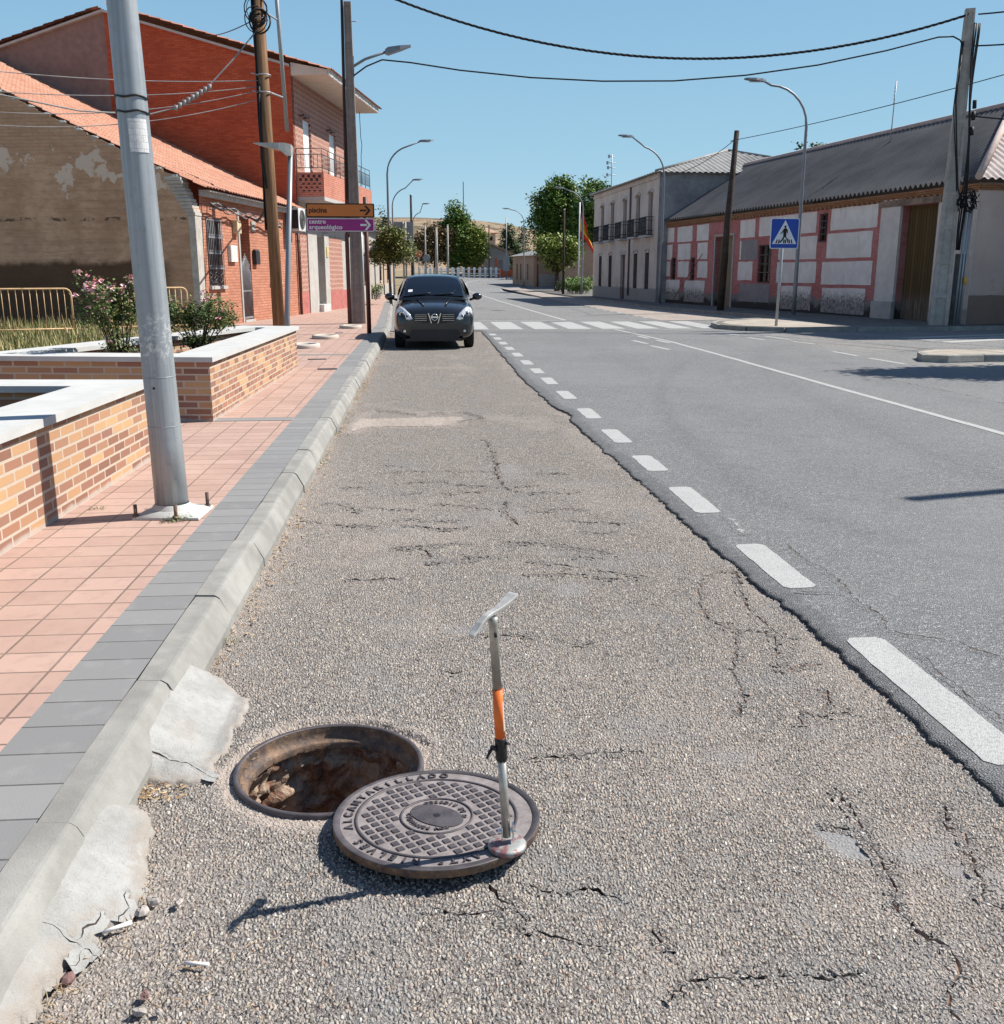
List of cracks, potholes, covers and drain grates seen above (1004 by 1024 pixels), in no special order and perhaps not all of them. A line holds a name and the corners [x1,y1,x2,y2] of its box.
crack [300,439,647,583]
manhole cover [333,770,540,879]
crack [432,875,632,955]
crack [691,544,1004,726]
manhole cover [233,724,424,821]
crack [643,783,1004,1024]
